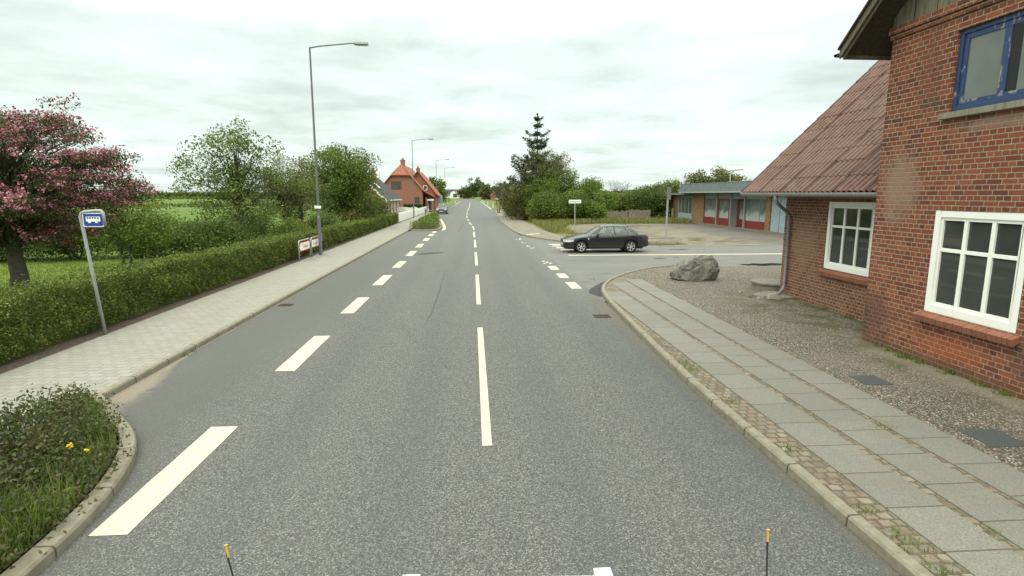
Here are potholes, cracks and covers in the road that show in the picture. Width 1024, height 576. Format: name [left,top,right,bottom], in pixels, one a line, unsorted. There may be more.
manhole cover [957,428,1024,448]
manhole cover [849,375,894,385]
